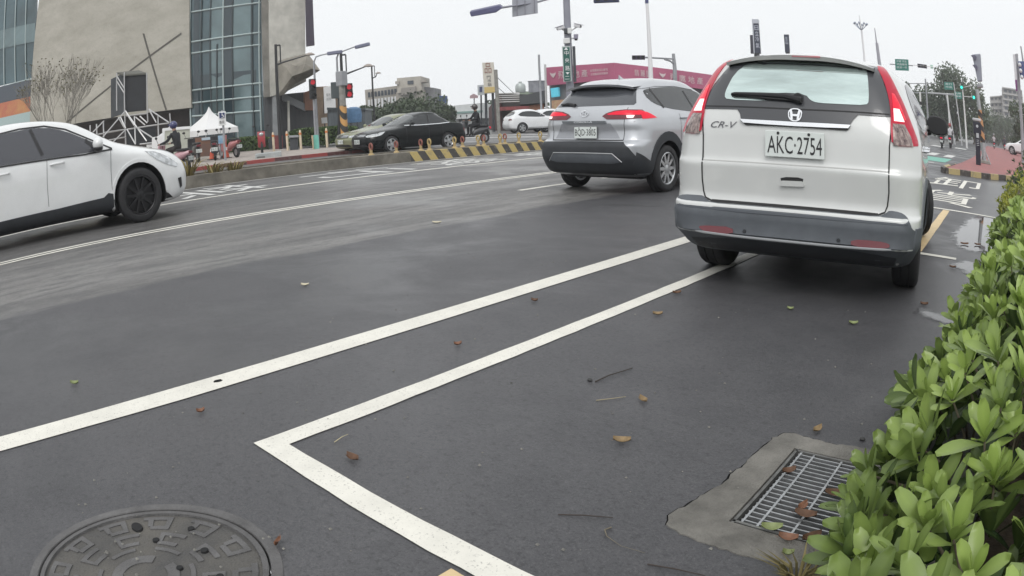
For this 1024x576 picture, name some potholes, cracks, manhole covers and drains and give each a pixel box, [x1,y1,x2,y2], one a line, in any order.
manhole cover [30,504,284,576]
